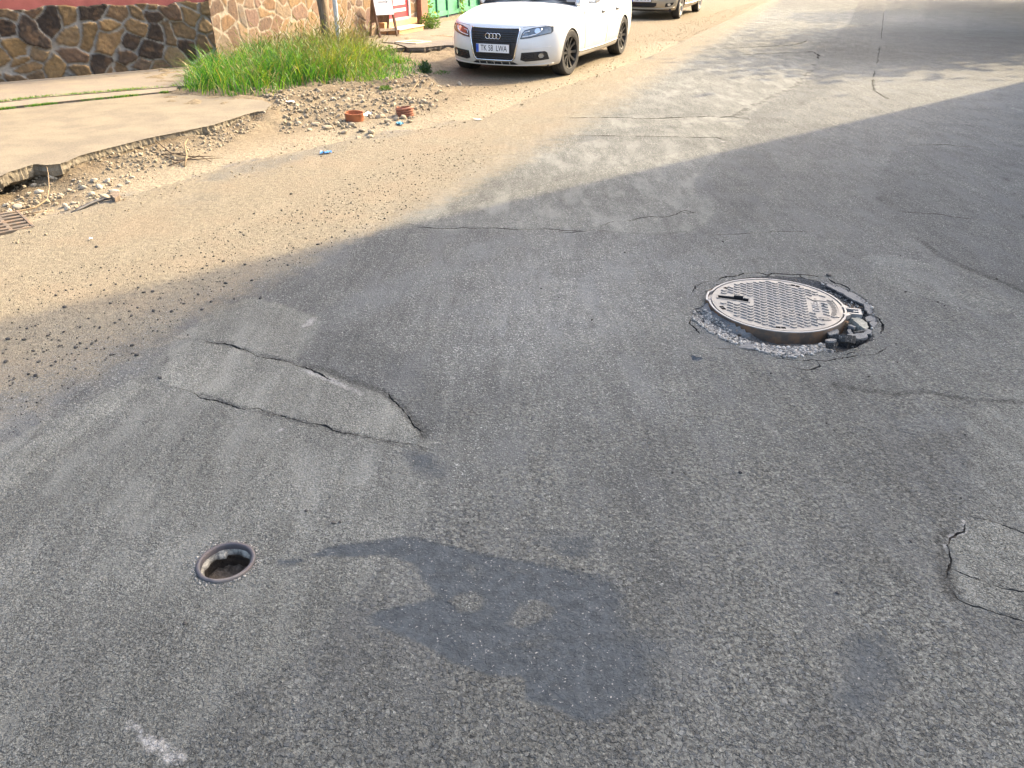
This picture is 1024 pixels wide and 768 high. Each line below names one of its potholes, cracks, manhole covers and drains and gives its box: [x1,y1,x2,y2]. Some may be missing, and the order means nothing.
crack [424,210,693,233]
crack [945,517,1024,622]
drain grate [0,210,35,236]
crack [168,341,427,452]
manhole cover [705,278,863,344]
